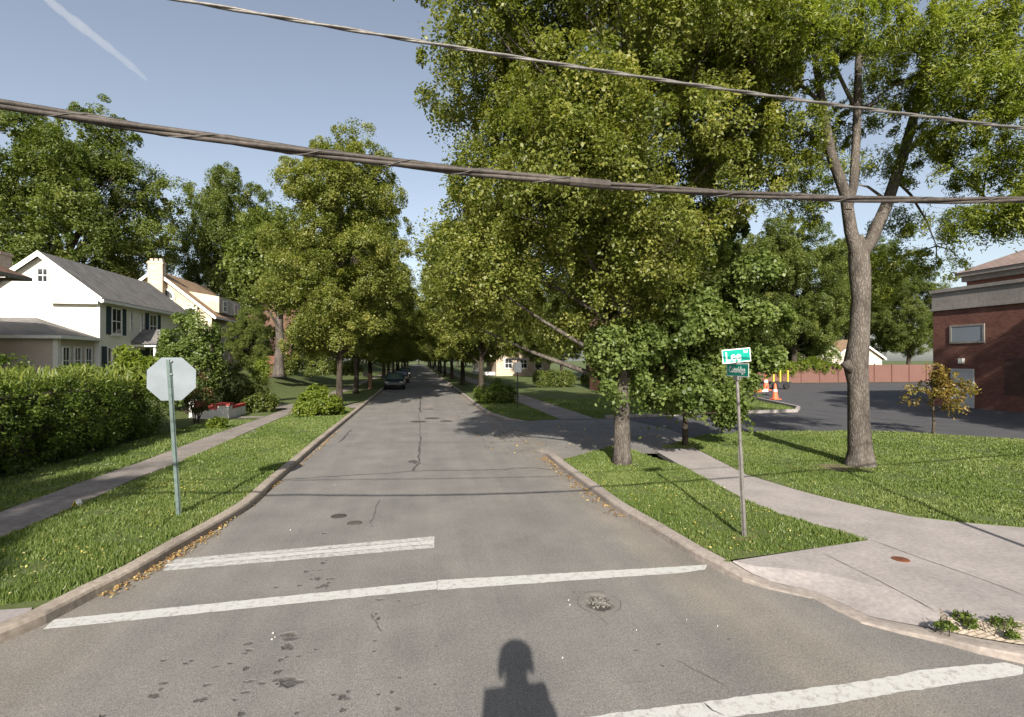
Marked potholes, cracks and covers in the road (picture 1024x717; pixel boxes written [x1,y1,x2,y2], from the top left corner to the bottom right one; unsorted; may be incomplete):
crack [284,396,552,480]
